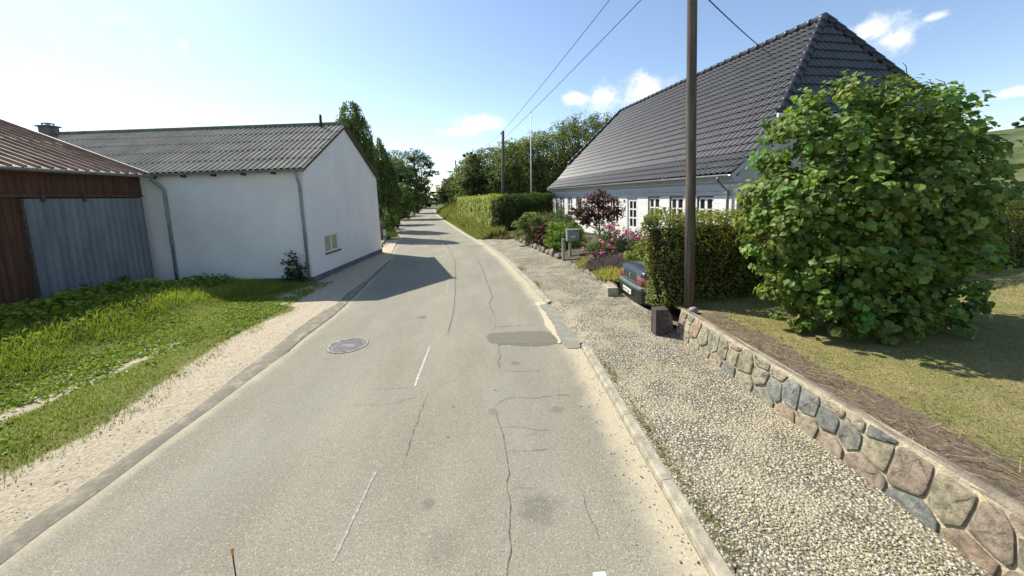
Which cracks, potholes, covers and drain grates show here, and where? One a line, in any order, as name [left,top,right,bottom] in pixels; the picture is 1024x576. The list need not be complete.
crack [479,263,544,371]
crack [494,394,574,568]
manhole cover [326,338,369,354]
crack [440,237,456,334]
